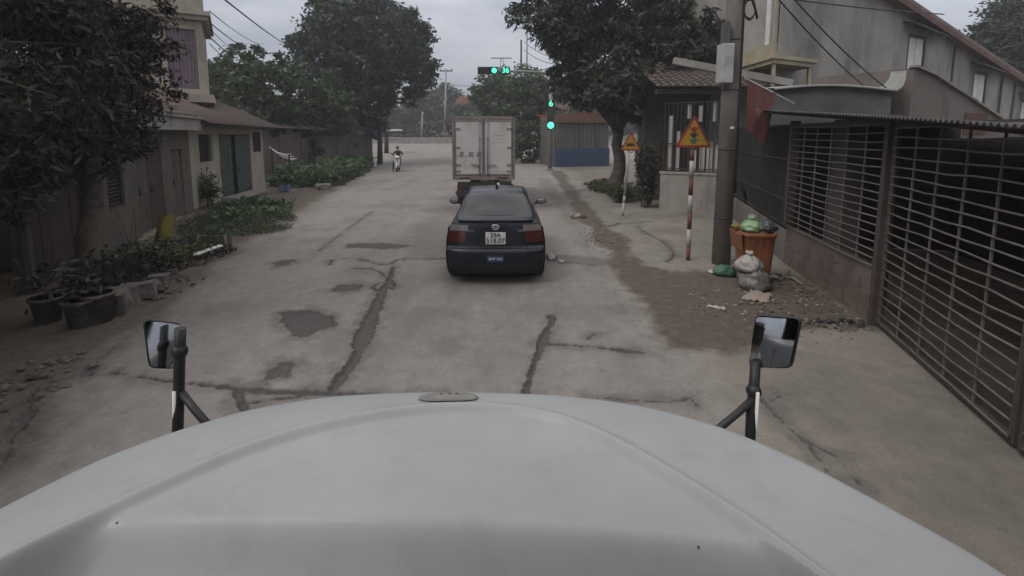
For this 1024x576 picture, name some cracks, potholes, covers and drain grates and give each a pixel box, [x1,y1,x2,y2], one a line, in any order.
crack [759,389,867,487]
crack [593,221,679,262]
crack [100,211,596,412]
crack [519,314,701,408]
